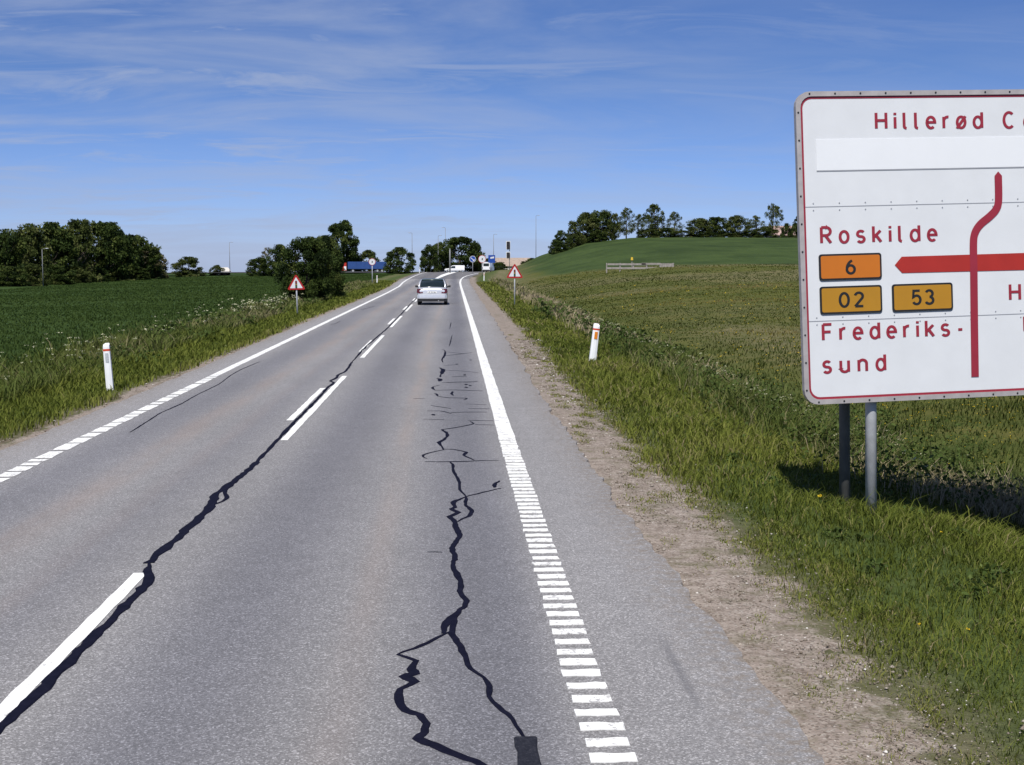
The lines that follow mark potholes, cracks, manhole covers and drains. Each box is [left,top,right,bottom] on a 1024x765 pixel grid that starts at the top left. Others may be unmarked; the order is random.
crack [131,362,258,432]
